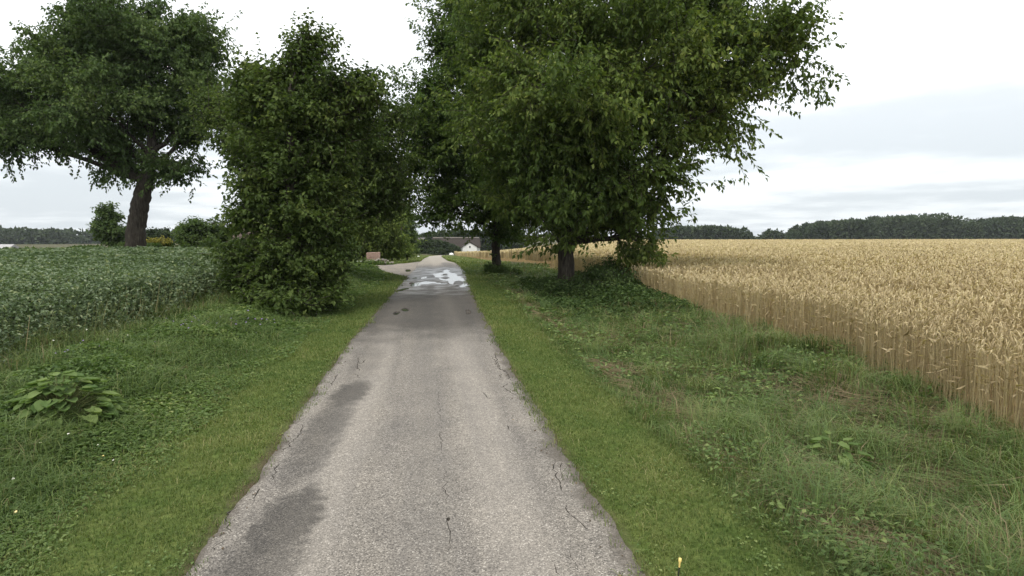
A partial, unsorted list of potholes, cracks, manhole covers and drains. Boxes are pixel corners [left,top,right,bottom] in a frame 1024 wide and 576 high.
crack [553,462,587,529]
